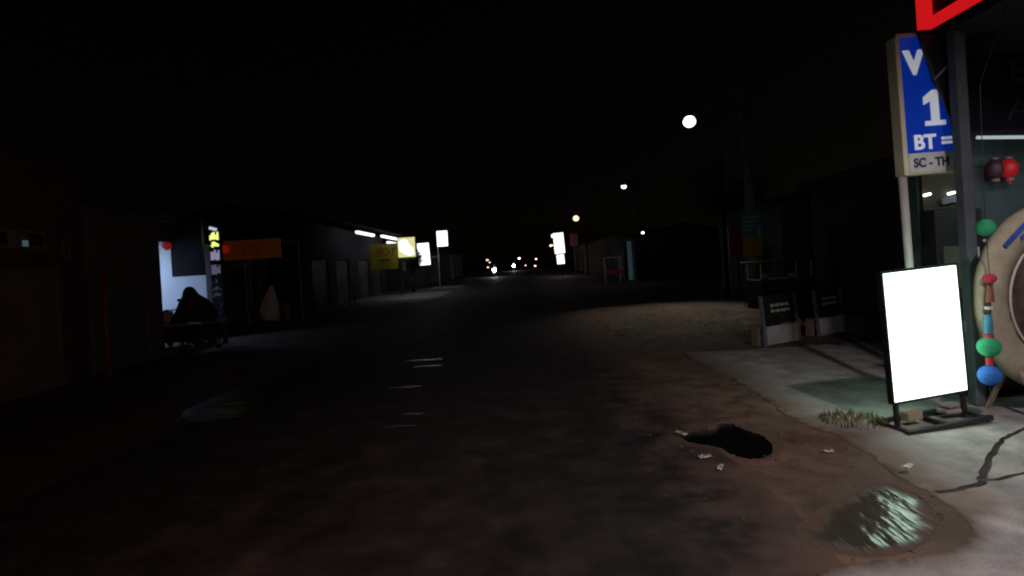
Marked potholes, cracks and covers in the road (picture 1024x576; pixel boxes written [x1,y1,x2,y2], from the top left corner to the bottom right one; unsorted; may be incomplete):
crack [933,427,1024,494]
pothole [674,420,780,462]
pothole [794,484,945,560]
